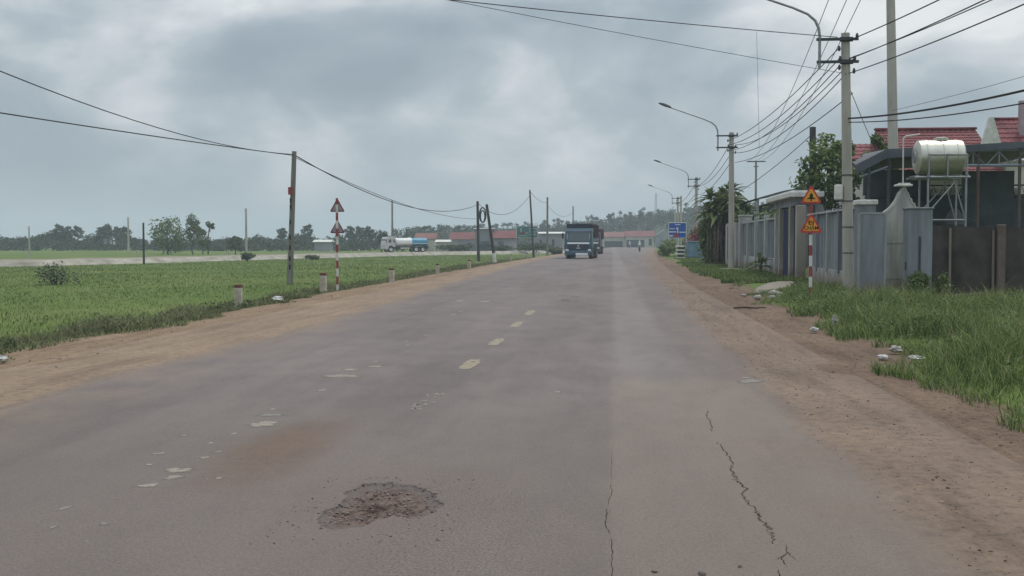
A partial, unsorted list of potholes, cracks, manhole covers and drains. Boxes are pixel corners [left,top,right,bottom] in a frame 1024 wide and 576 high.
crack [706,411,795,576]
pothole [250,476,475,547]
crack [605,457,613,576]
